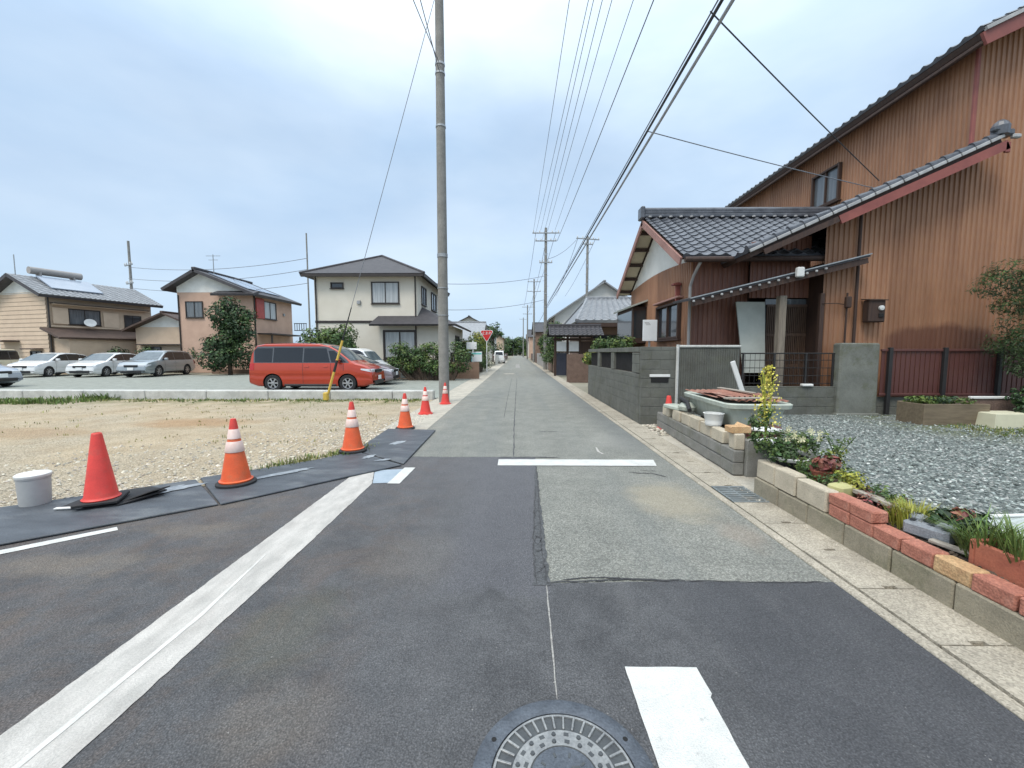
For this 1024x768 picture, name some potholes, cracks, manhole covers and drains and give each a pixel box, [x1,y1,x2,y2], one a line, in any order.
drain grate [711,486,770,503]
manhole cover [472,700,654,768]
